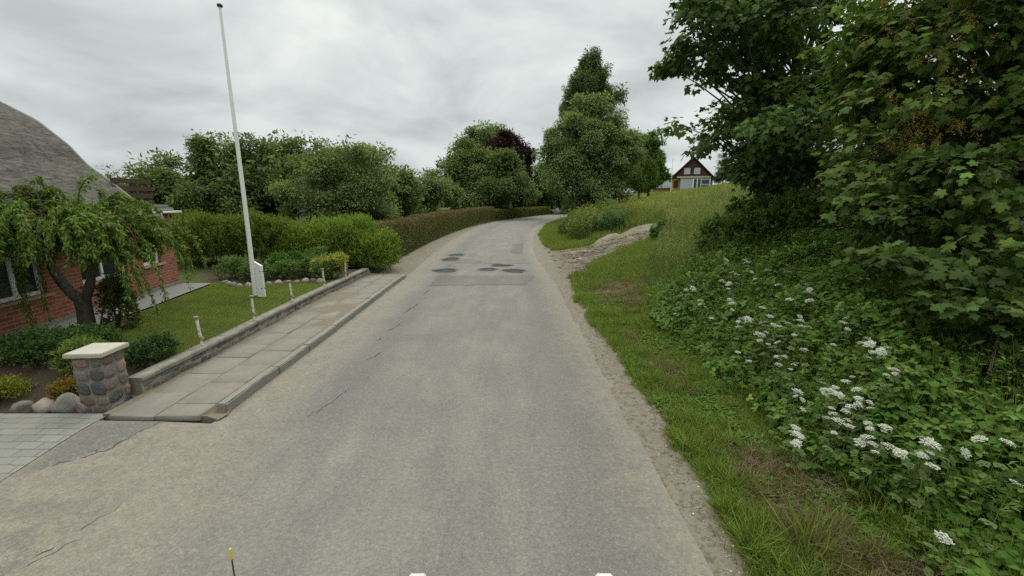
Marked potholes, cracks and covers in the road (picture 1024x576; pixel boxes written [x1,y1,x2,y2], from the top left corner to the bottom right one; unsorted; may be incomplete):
crack [23,506,120,568]
crack [53,422,160,466]
